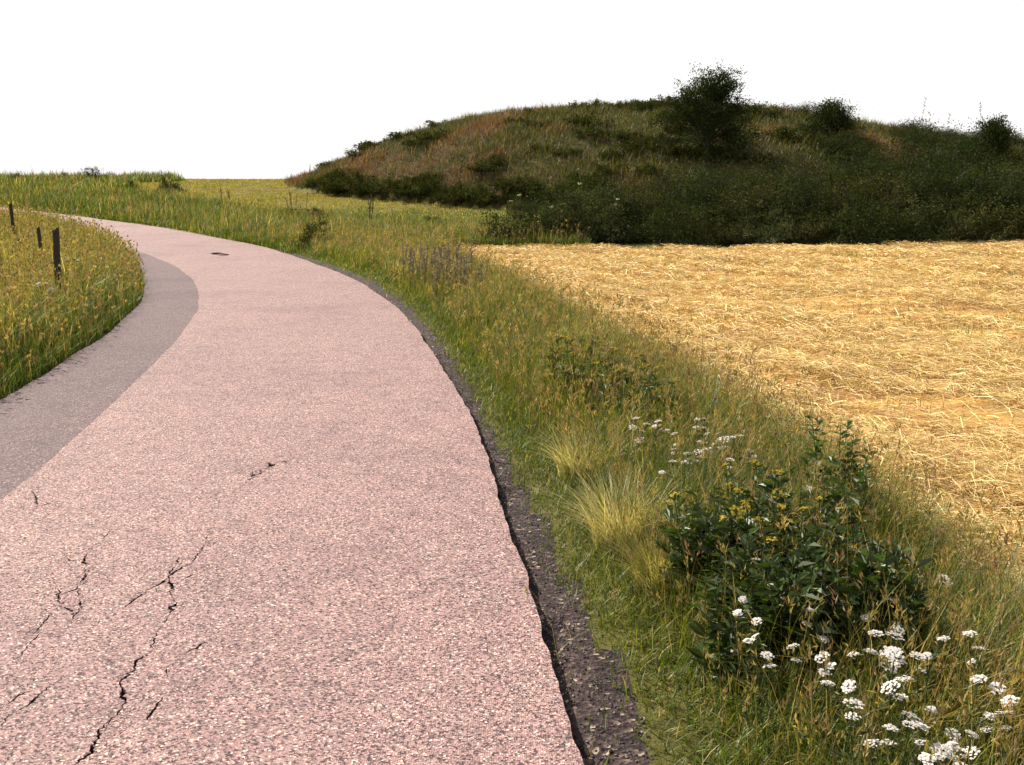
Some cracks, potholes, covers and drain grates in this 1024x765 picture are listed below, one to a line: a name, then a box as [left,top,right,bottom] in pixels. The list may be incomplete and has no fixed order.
crack [75,535,226,765]
crack [20,557,91,656]
